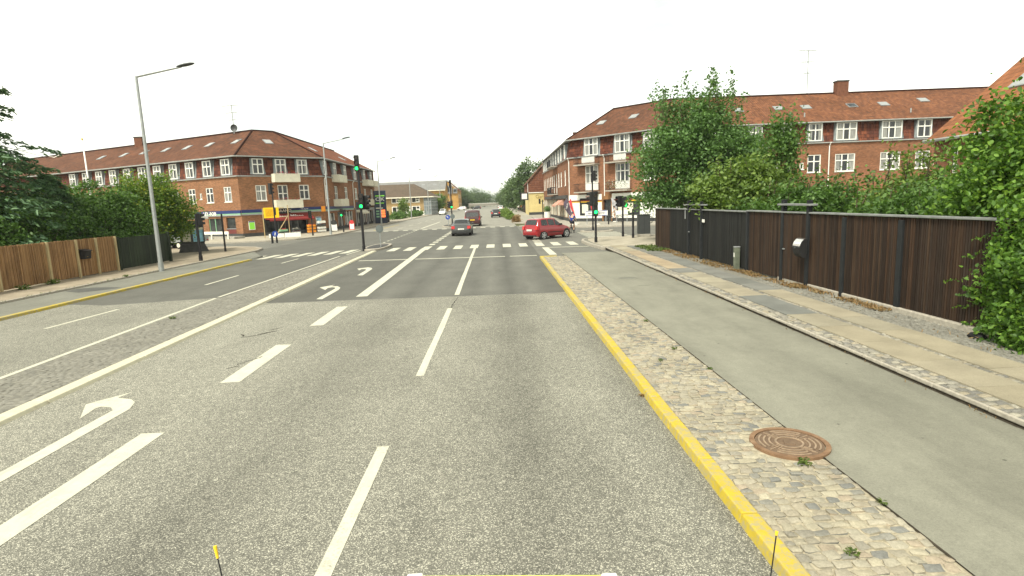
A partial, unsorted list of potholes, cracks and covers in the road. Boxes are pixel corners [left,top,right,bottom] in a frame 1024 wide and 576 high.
manhole cover [749,427,832,461]
